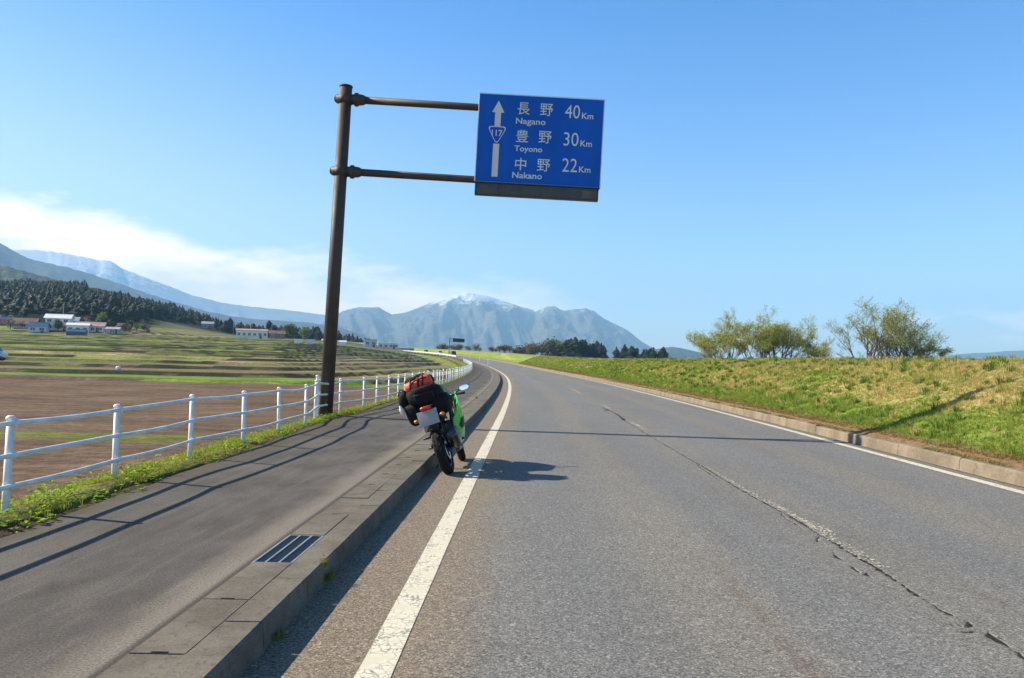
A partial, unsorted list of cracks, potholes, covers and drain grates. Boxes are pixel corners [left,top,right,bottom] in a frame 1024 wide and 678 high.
crack [604,408,1024,659]
drain grate [252,535,323,564]
